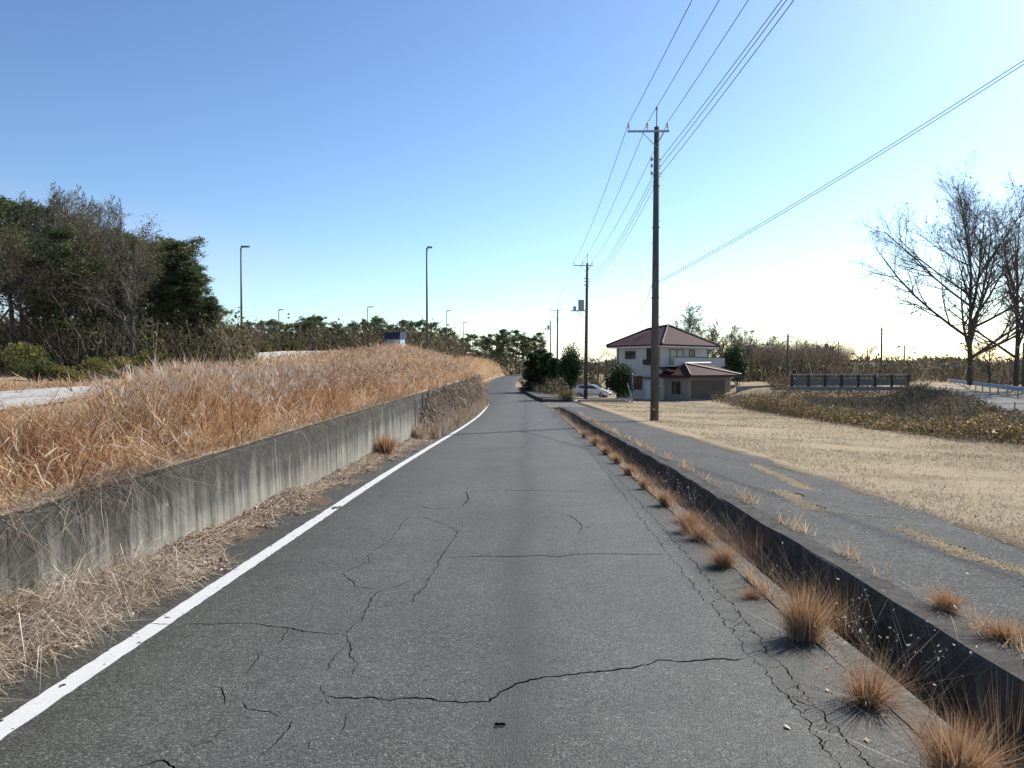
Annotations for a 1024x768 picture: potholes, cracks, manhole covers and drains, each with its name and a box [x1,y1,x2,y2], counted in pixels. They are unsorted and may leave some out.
crack [198,446,875,768]
